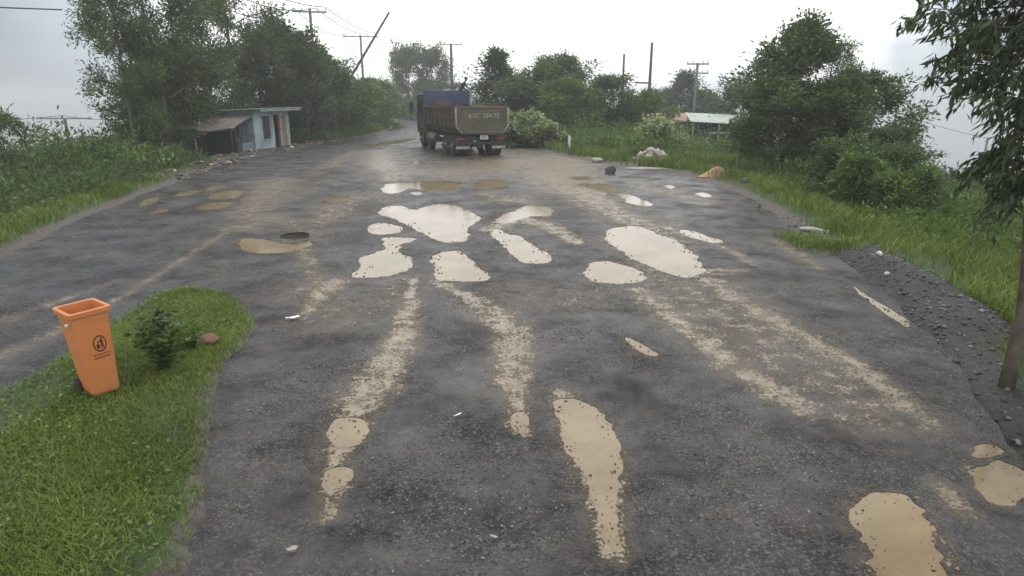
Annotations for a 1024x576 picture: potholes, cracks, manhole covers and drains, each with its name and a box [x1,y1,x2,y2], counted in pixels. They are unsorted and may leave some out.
pothole [367,222,403,235]
pothole [474,180,507,191]
pothole [377,204,481,243]
pothole [582,260,648,284]
pothole [678,229,724,243]
pothole [379,181,462,194]
pothole [326,417,370,446]
pothole [321,466,354,490]
pothole [280,232,309,240]
pothole [967,459,1024,506]
pothole [238,238,313,253]
pothole [430,250,491,282]
